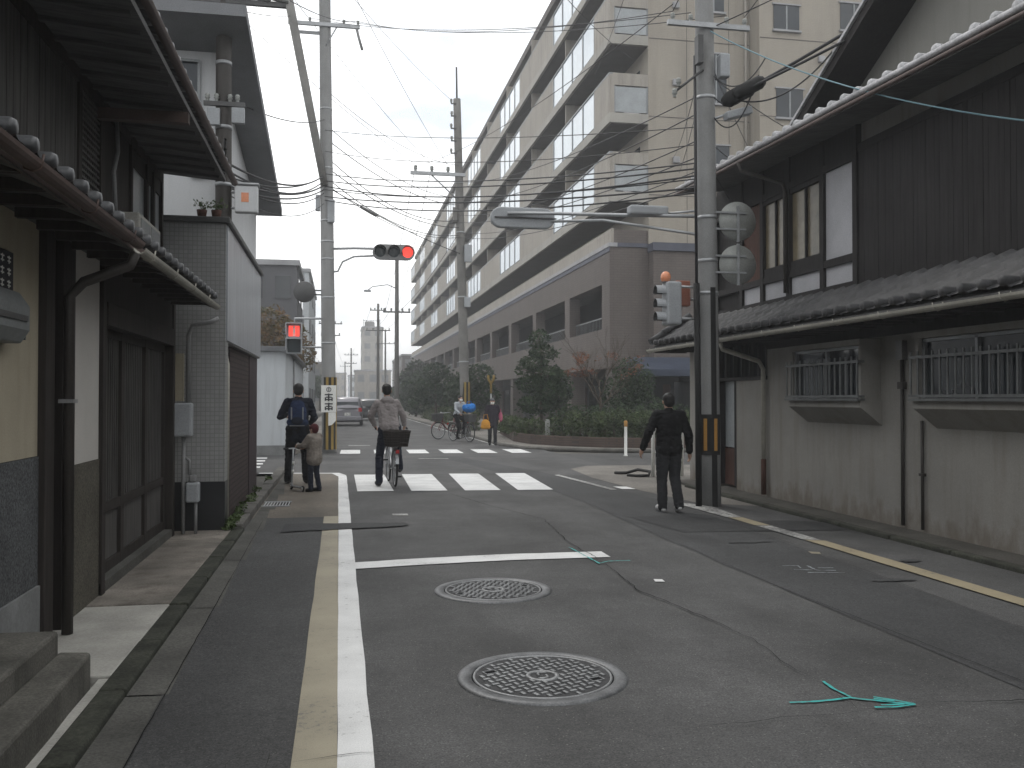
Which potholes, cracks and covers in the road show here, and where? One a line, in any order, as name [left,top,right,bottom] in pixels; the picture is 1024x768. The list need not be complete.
manhole cover [434,578,552,604]
manhole cover [457,652,629,706]
